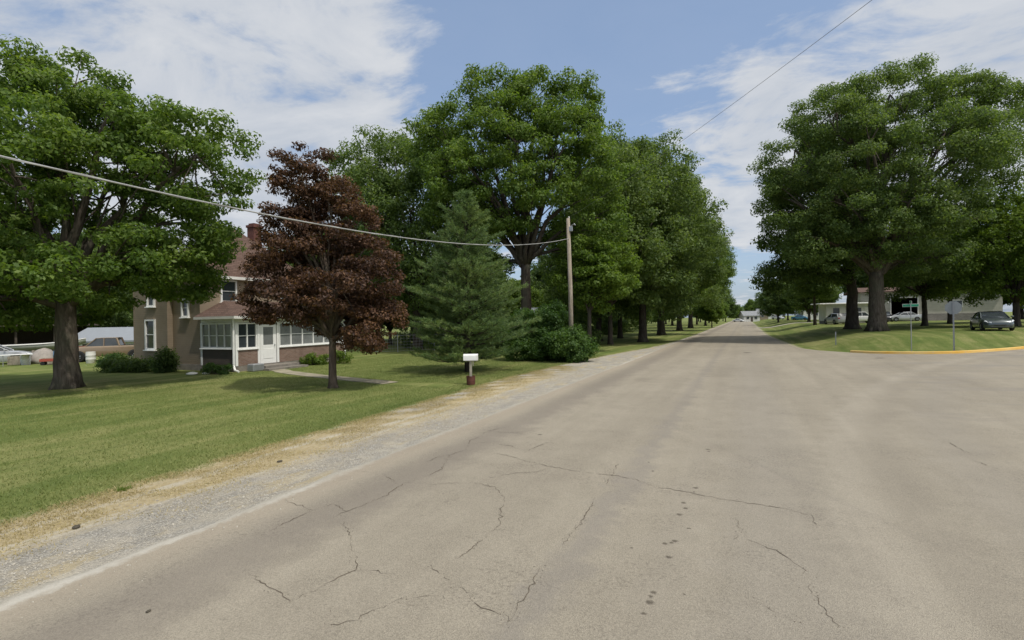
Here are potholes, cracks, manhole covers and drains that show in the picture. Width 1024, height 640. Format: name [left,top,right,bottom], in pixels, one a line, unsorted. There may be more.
crack [734,521,840,629]
crack [252,502,380,600]
crack [313,429,817,625]
